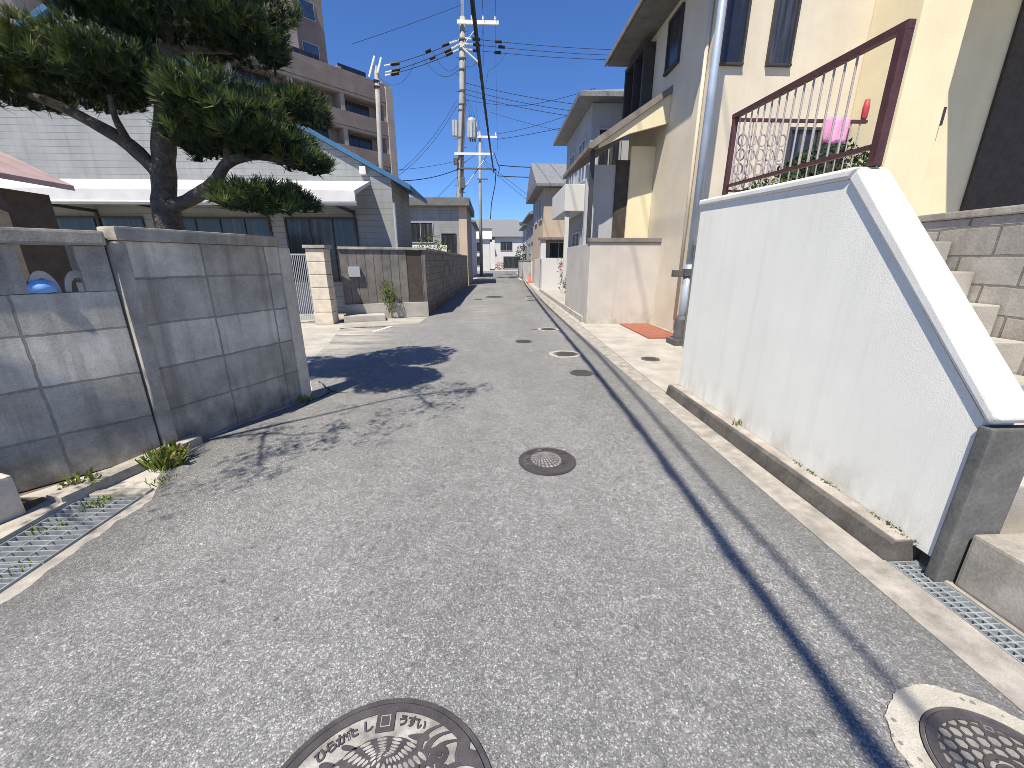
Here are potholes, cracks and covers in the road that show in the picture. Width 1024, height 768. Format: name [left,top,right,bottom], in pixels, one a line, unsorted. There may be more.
drain grate [0,496,141,565]
manhole cover [518,447,576,476]
manhole cover [884,684,1024,768]
drain grate [0,563,42,593]
drain grate [888,561,1024,665]
manhole cover [281,698,491,768]
